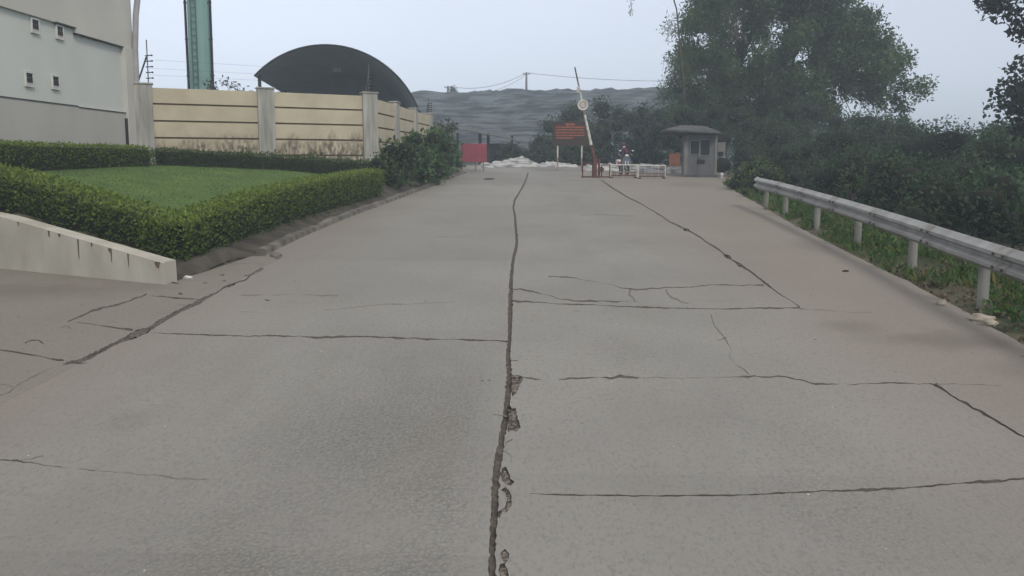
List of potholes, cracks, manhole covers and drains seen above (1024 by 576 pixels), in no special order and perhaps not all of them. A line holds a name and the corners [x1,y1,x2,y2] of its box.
crack [0,362,84,395]
crack [0,455,206,480]
crack [513,276,764,304]
crack [60,294,185,329]
crack [558,319,998,386]
